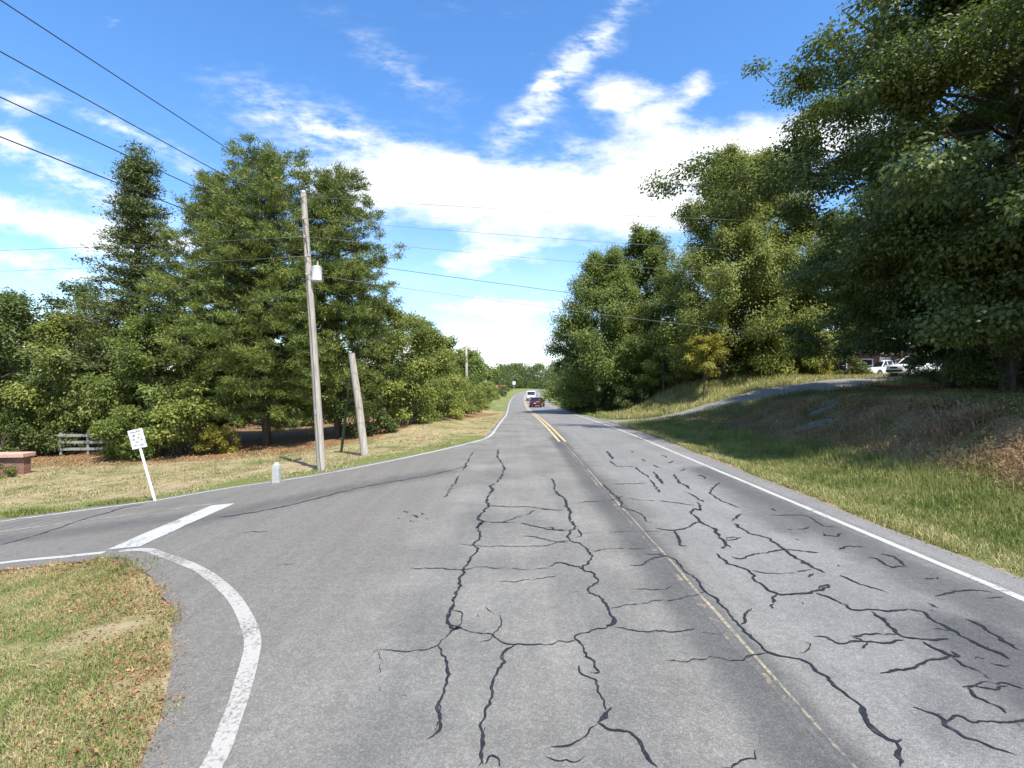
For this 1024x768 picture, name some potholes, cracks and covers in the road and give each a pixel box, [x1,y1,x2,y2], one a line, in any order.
crack [373,450,1024,767]
